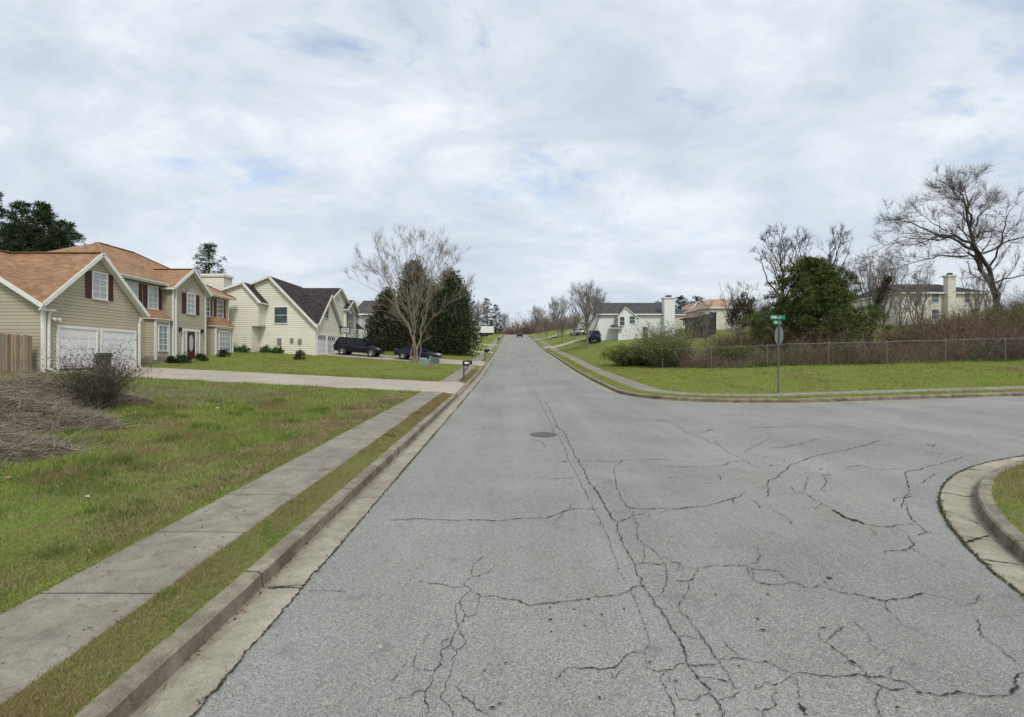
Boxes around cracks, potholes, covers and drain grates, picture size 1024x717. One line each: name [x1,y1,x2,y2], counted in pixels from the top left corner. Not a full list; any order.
crack [389,387,1023,717]
